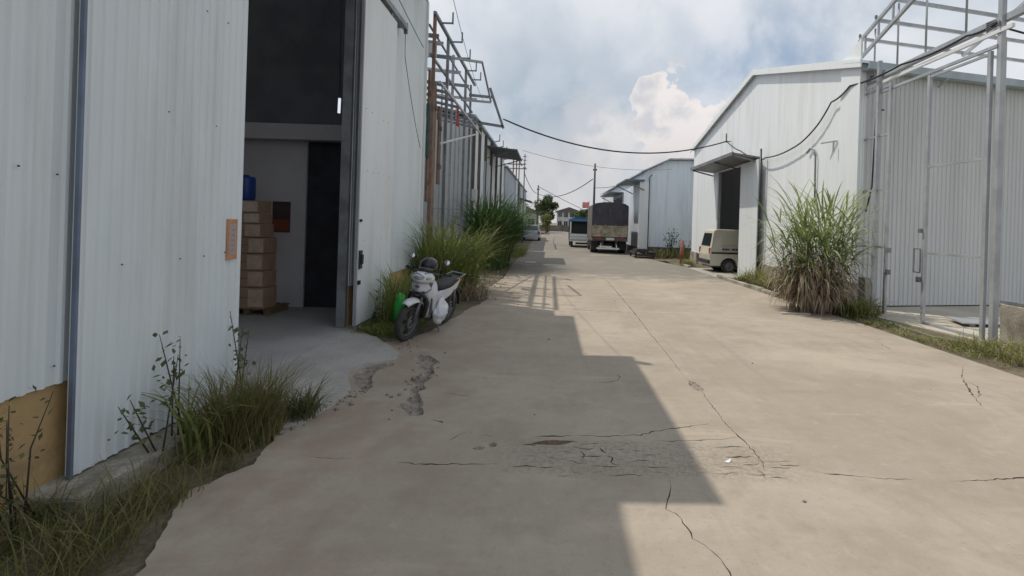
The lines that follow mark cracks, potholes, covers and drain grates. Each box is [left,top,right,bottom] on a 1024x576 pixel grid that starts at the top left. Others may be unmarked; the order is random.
pothole [396,354,439,416]
crack [961,368,981,405]
crack [512,424,911,576]
